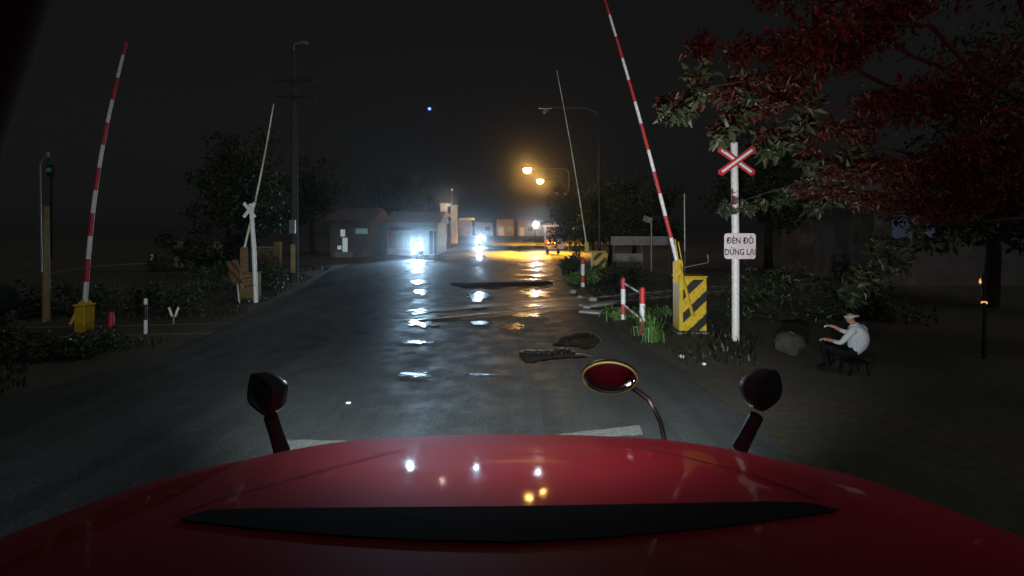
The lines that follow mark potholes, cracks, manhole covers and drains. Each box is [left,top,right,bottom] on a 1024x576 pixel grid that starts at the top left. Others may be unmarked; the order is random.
pothole [450,281,555,290]
pothole [552,331,602,350]
pothole [518,348,592,364]
